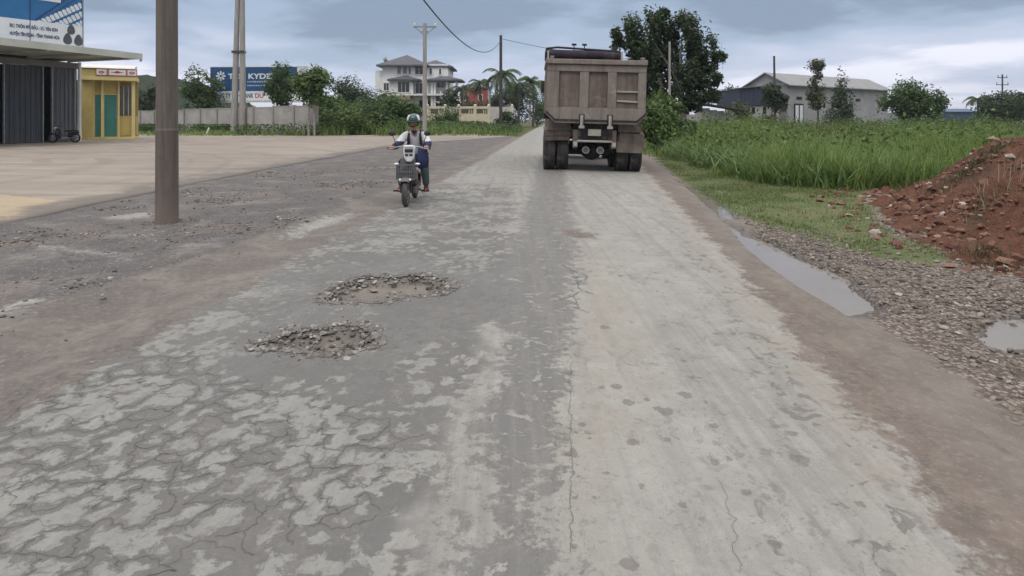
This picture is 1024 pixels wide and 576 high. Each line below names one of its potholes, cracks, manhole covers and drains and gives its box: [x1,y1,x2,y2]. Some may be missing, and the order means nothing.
crack [0,344,424,576]
pothole [306,271,470,310]
pothole [227,316,402,366]
